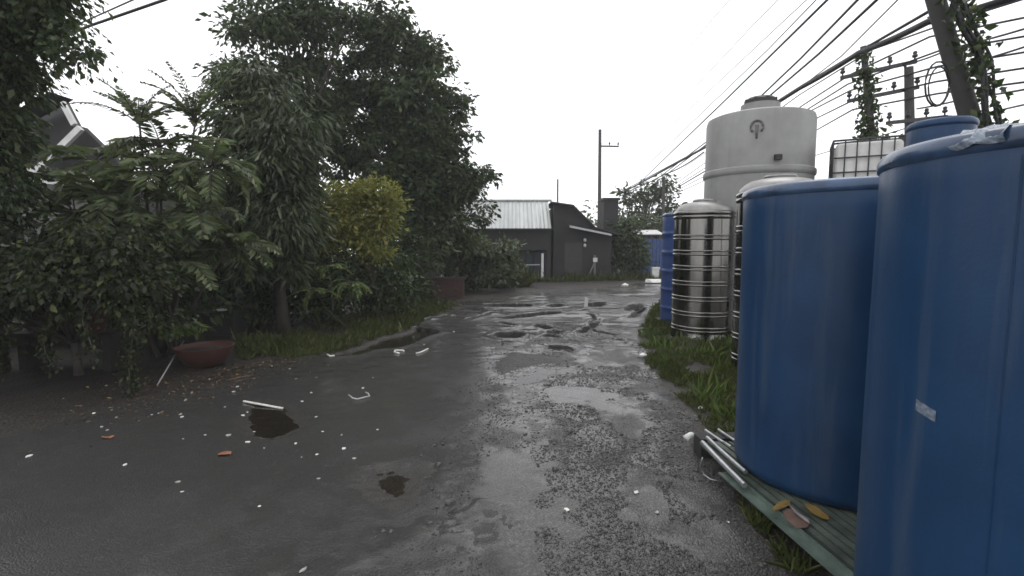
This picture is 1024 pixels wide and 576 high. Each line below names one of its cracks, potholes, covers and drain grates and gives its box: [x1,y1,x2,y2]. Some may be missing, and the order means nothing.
pothole [624,304,644,313]
pothole [234,399,311,441]
